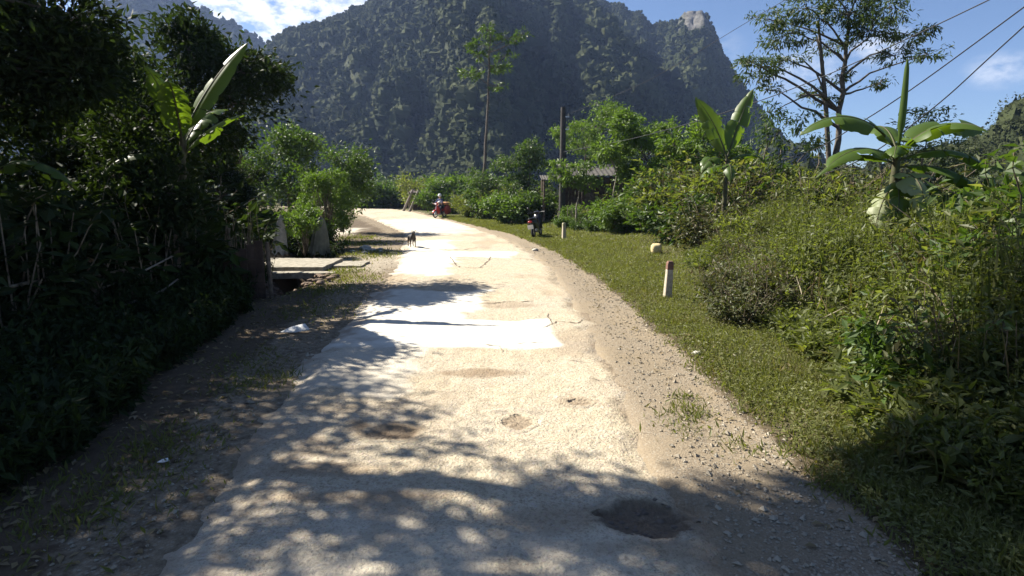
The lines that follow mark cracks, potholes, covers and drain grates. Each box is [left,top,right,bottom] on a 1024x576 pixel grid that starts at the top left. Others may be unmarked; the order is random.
pothole [357,424,427,443]
pothole [581,493,704,545]
pothole [495,411,540,434]
pothole [561,396,597,408]
